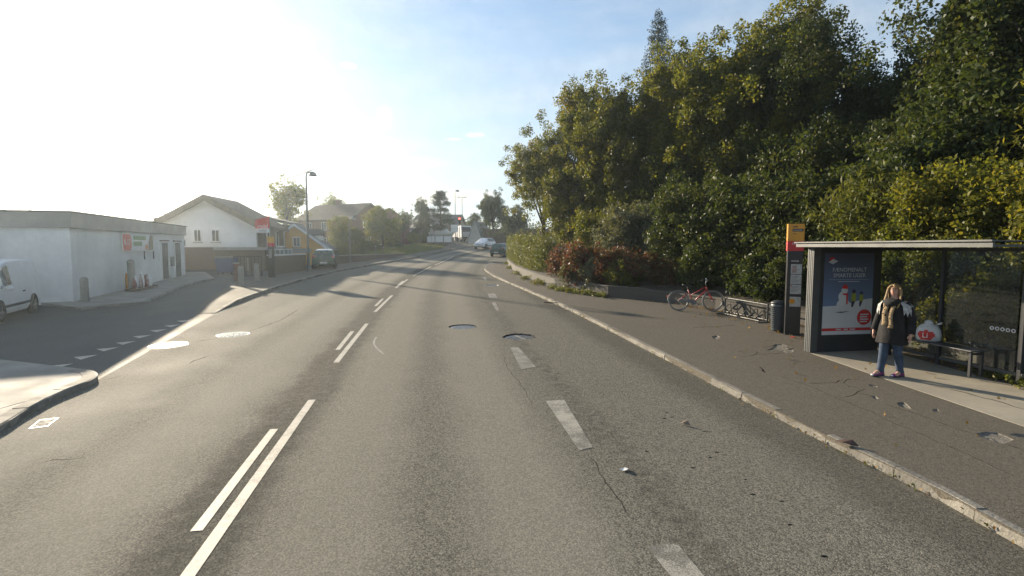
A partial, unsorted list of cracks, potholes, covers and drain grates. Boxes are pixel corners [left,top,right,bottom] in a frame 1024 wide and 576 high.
pothole [767,344,795,353]
pothole [976,432,1014,444]
